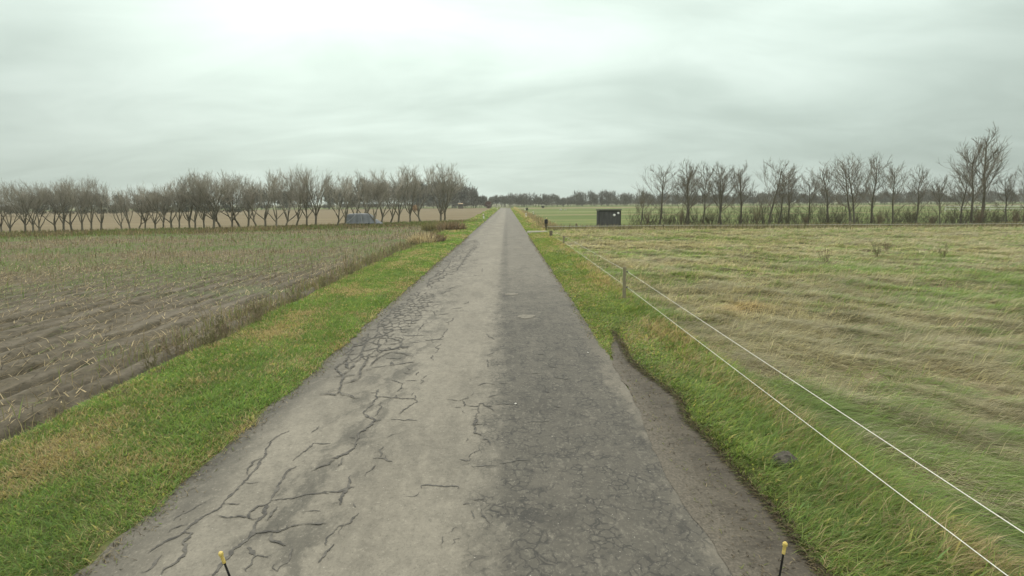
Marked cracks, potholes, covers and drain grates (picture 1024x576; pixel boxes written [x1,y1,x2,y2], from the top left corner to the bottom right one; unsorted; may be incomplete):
crack [450,334,542,467]
crack [527,342,580,440]
crack [142,241,483,575]
